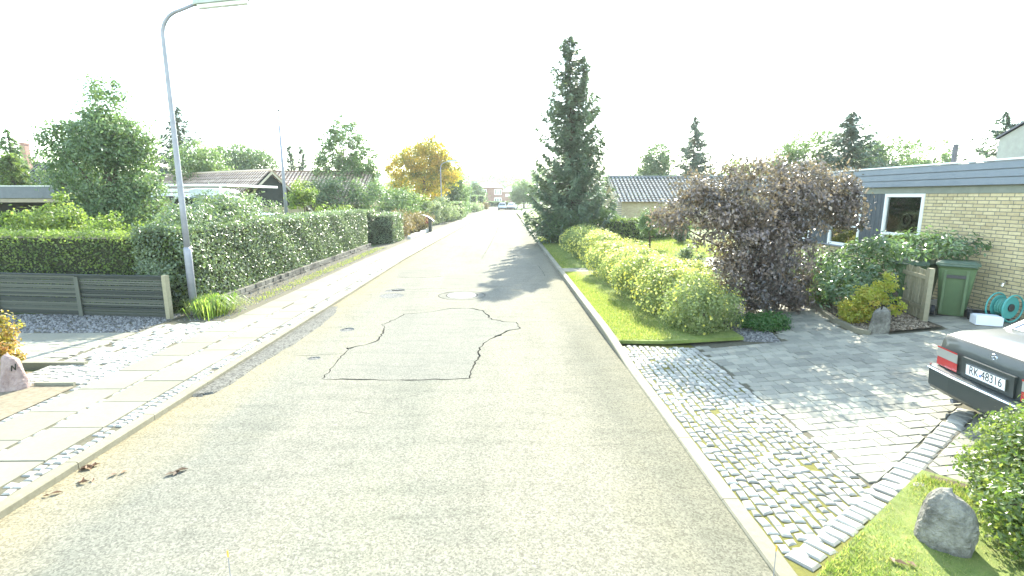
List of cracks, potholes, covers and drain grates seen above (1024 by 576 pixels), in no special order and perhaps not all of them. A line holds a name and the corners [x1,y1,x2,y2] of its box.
crack [293,308,521,381]
manhole cover [438,291,485,300]
